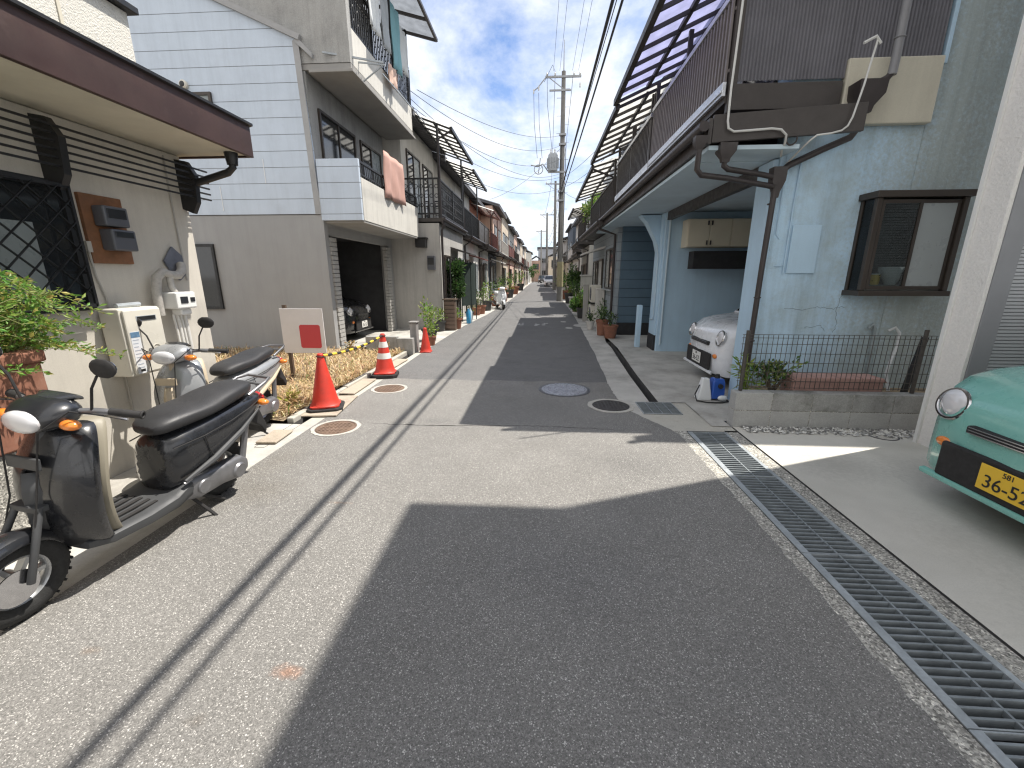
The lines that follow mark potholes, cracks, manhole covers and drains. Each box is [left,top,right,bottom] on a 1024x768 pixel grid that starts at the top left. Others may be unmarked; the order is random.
manhole cover [539,383,590,397]
manhole cover [310,419,361,436]
manhole cover [371,384,408,394]
drain grate [802,553,1024,733]
drain grate [729,475,872,556]
drain grate [968,729,1024,768]
manhole cover [588,399,634,413]
drain grate [635,402,683,415]
drain grate [688,431,779,477]
